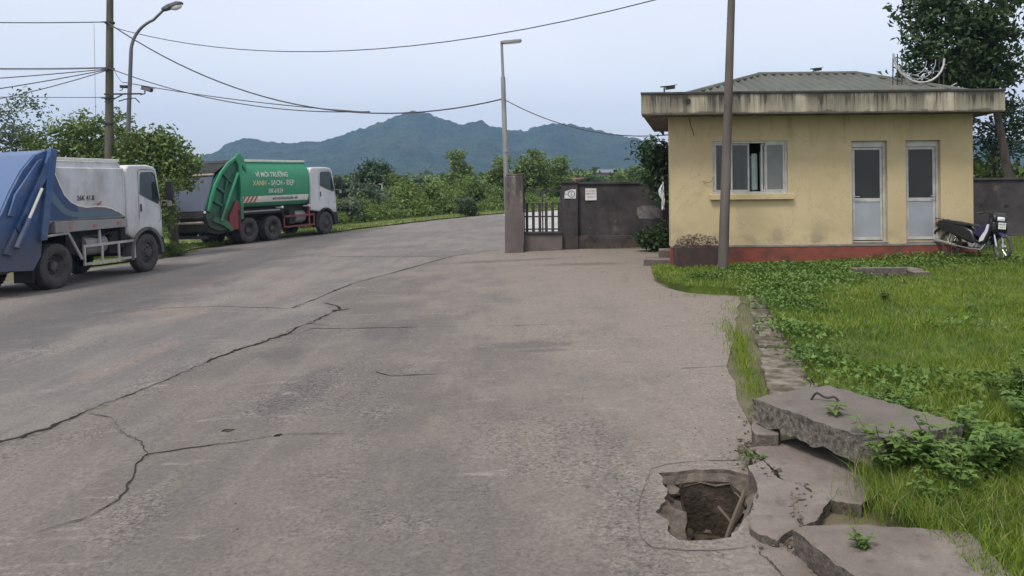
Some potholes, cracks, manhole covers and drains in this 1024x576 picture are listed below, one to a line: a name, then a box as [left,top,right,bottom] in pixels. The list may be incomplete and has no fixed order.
pothole [638,460,755,550]
crack [0,303,351,535]
